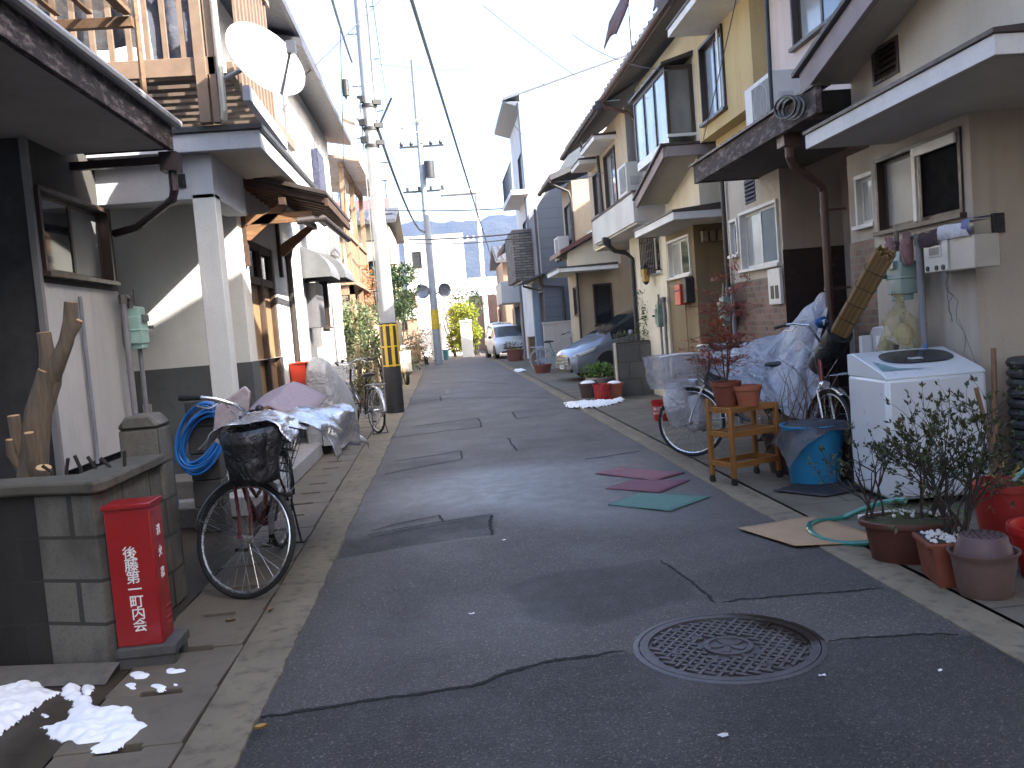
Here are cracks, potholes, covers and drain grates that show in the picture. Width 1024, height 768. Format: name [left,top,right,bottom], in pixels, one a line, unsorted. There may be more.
crack [660,560,876,603]
manhole cover [633,613,828,684]
crack [828,633,959,641]
crack [260,651,626,717]
